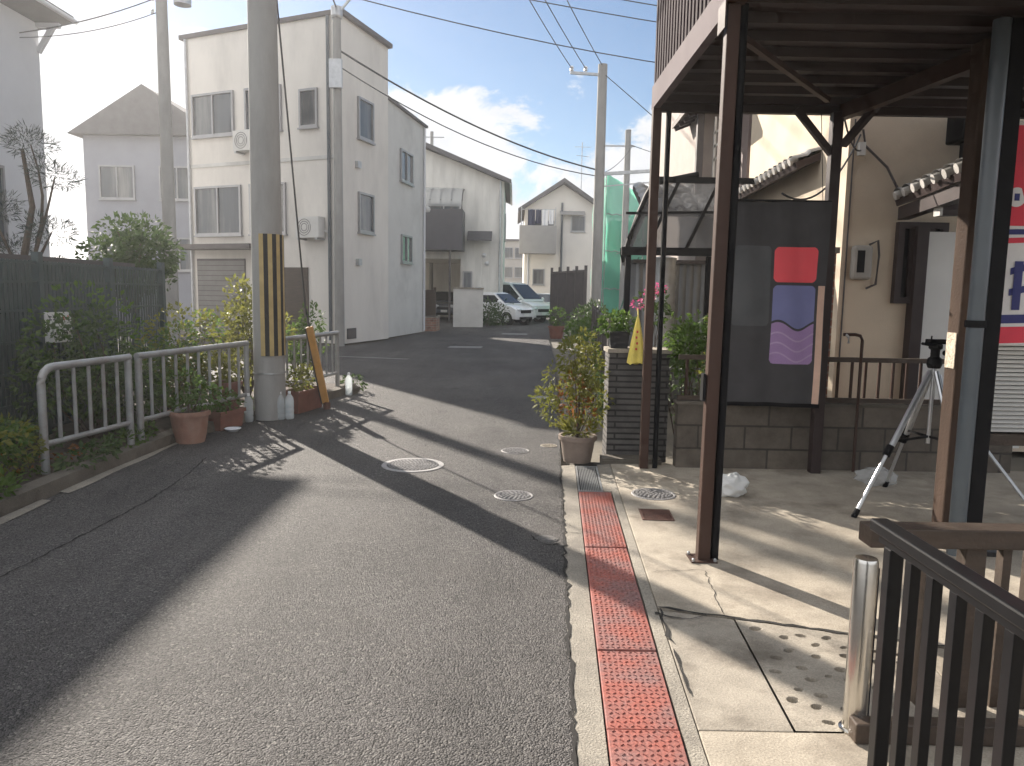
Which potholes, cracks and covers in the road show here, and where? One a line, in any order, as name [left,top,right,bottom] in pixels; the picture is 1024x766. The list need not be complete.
manhole cover [494,490,533,501]
crack [0,458,206,577]
crack [653,569,945,694]
drain grate [575,466,603,493]
manhole cover [381,458,444,472]
manhole cover [631,488,676,500]
